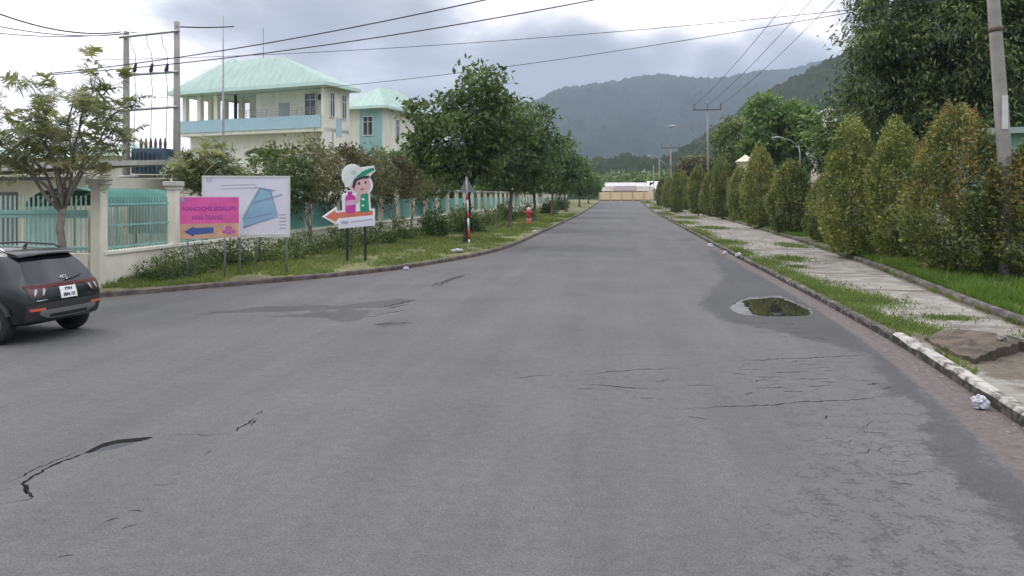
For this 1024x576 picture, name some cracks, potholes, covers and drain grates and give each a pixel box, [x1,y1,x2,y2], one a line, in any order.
crack [55,411,263,558]
crack [9,437,152,503]
pothole [729,295,813,316]
crack [523,354,924,485]
